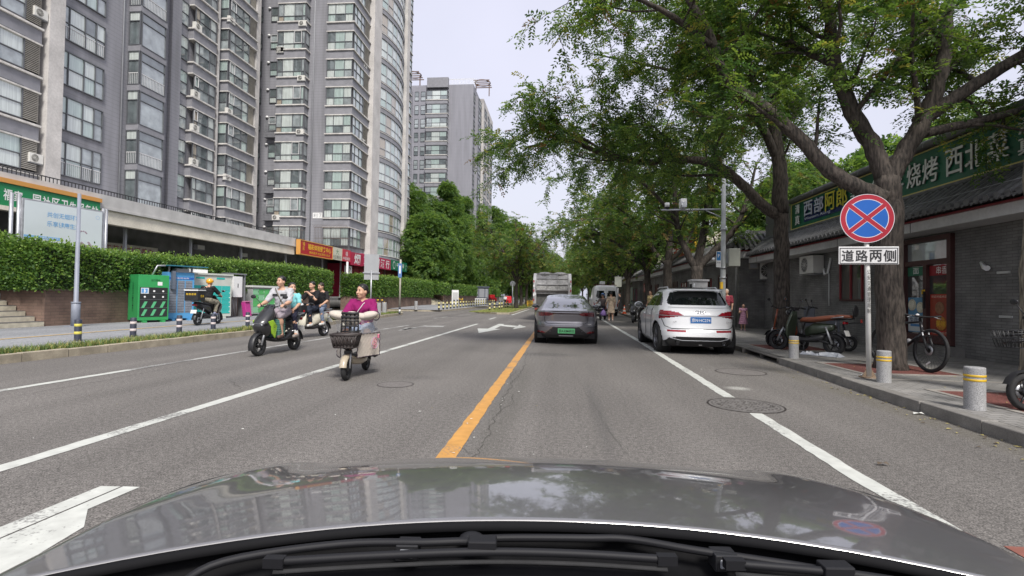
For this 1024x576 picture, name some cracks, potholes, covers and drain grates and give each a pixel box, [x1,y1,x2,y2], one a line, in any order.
manhole cover [707,398,787,413]
crack [465,345,542,457]
